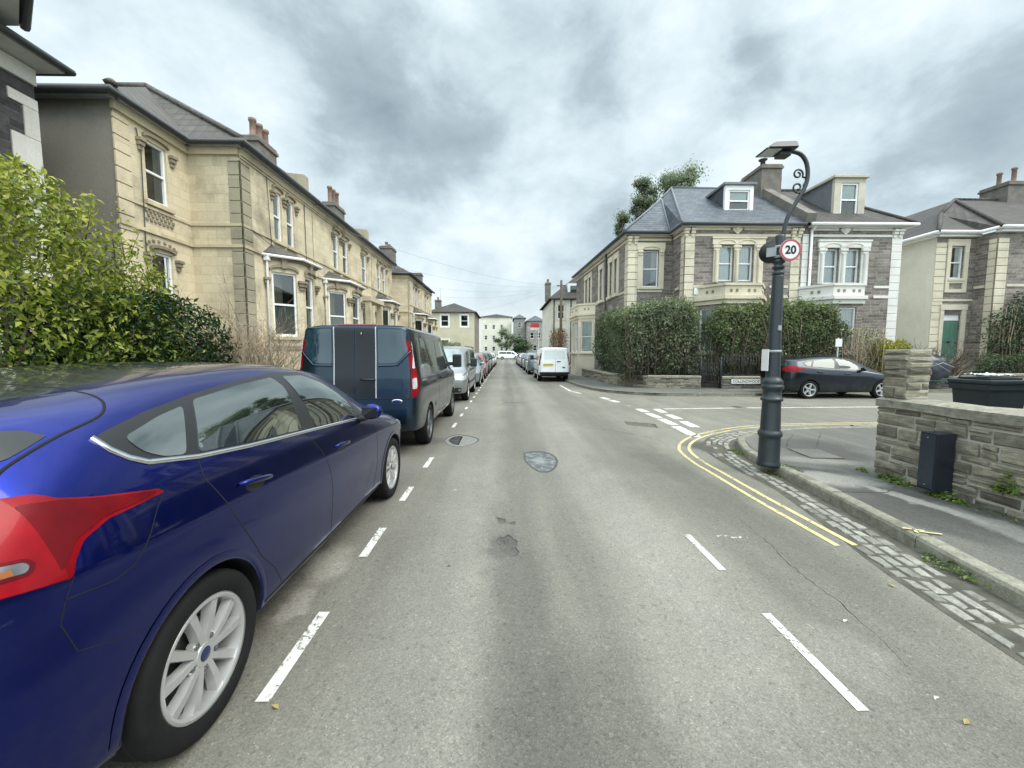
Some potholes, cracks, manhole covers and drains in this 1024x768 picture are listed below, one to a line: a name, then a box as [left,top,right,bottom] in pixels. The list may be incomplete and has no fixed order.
pothole [495,535,519,557]
manhole cover [444,434,479,447]
